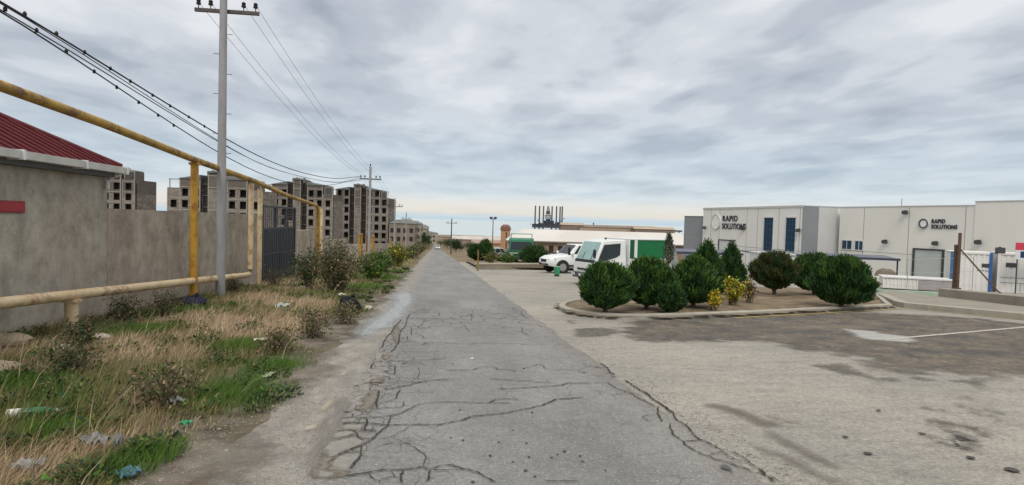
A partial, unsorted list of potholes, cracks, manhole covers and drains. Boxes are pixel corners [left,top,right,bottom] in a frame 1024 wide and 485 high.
crack [335,312,778,482]
